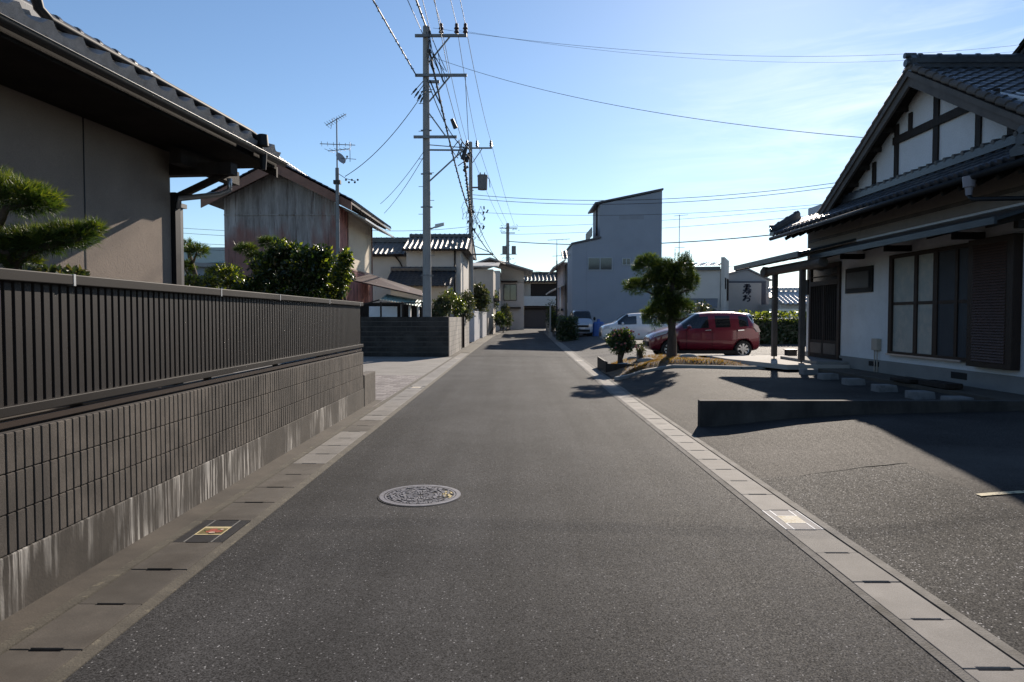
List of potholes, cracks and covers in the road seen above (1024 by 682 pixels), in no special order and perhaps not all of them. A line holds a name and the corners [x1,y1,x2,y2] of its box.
manhole cover [378,485,462,507]
